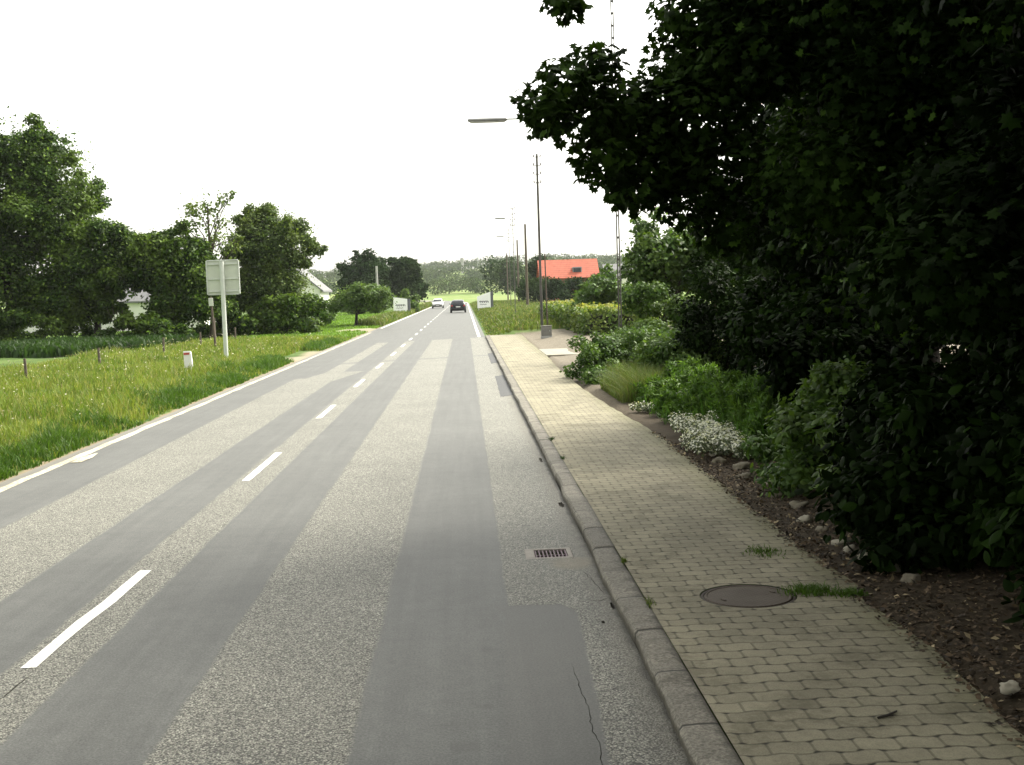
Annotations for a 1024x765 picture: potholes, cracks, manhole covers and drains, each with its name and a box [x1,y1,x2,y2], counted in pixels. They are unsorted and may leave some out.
drain grate [524,547,573,559]
crack [574,672,603,765]
manhole cover [700,585,797,608]
